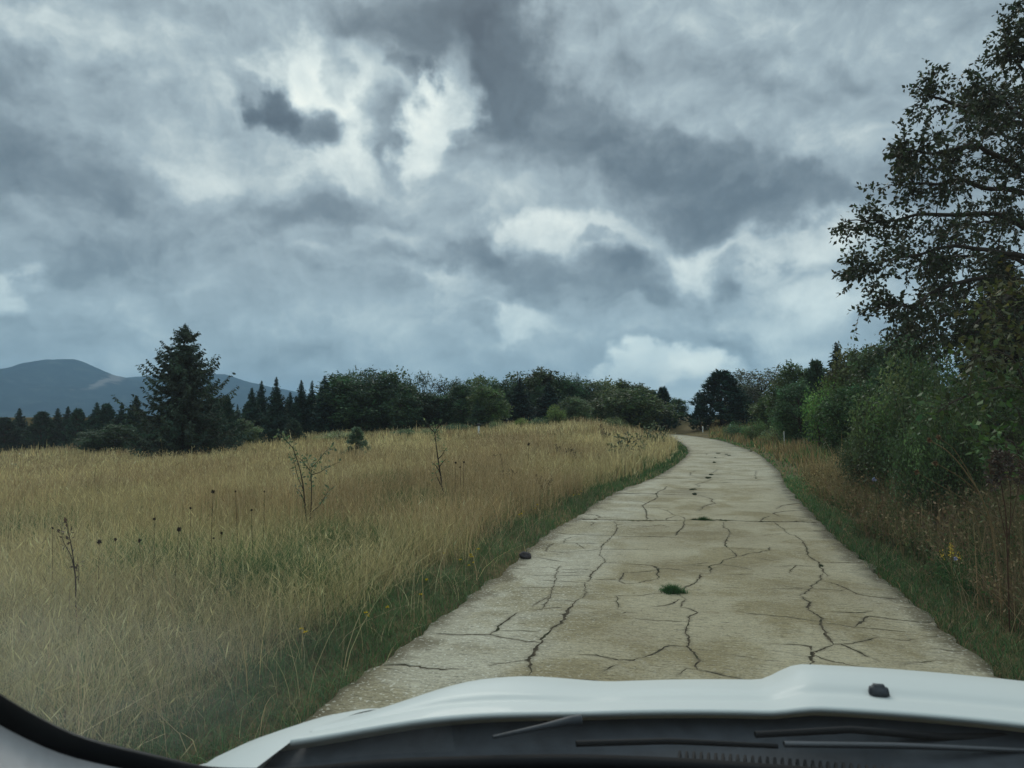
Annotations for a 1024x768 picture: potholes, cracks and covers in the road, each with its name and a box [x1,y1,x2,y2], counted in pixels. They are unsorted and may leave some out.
crack [447,486,931,679]
